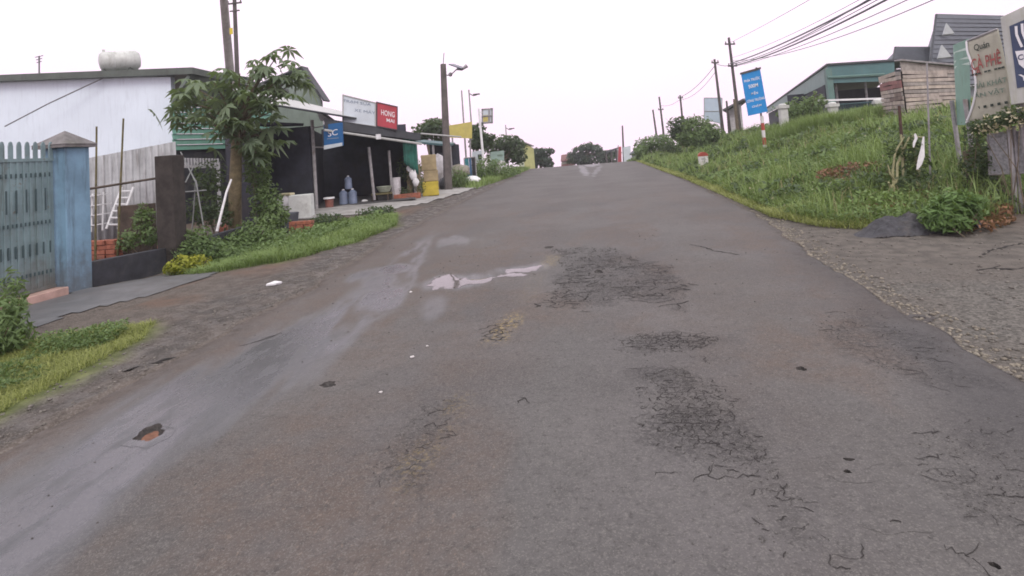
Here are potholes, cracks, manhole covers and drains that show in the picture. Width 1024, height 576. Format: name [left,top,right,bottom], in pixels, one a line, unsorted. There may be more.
crack [619,332,728,376]
crack [944,543,990,576]
pothole [120,418,176,448]
crack [479,317,519,340]
crack [825,311,967,391]
crack [907,419,1024,525]
crack [634,365,864,569]
crack [379,399,460,485]
